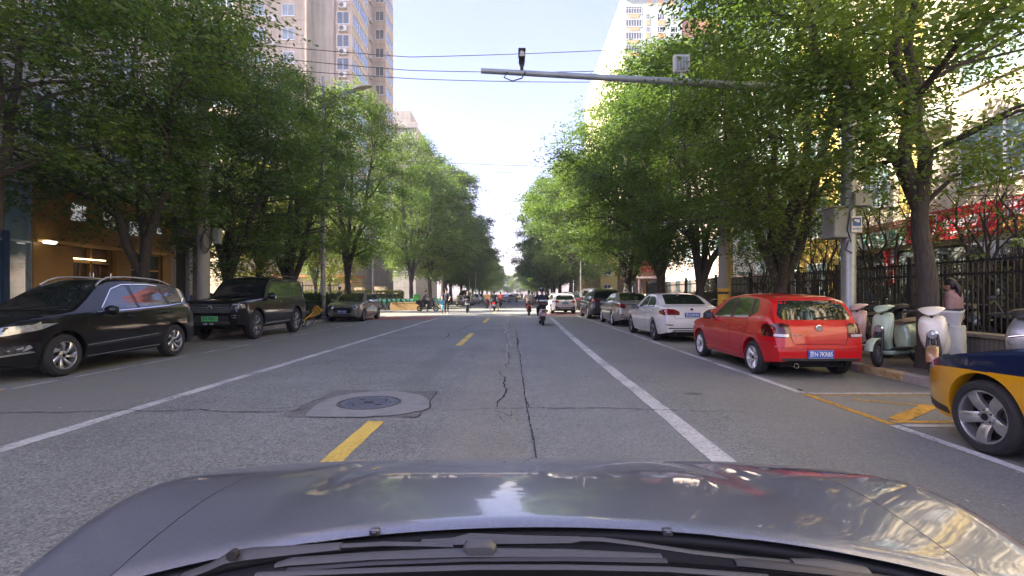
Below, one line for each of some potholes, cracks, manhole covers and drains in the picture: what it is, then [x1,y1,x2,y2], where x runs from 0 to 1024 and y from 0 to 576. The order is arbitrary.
manhole cover [306,391,430,417]
